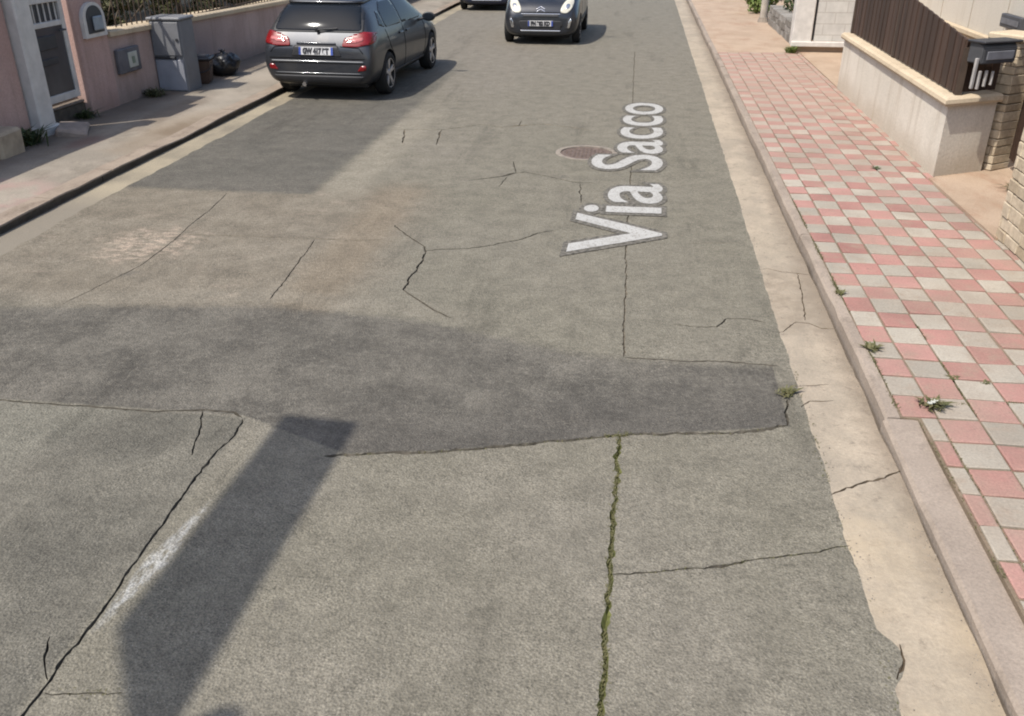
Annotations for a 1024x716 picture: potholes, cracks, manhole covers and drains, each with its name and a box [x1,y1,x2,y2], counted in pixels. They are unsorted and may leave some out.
manhole cover [556,145,617,160]
crack [771,269,834,332]
crack [466,161,585,201]
crack [401,122,594,145]
crack [674,318,765,328]
crack [613,546,846,575]
crack [0,399,243,716]
crack [190,226,554,318]
